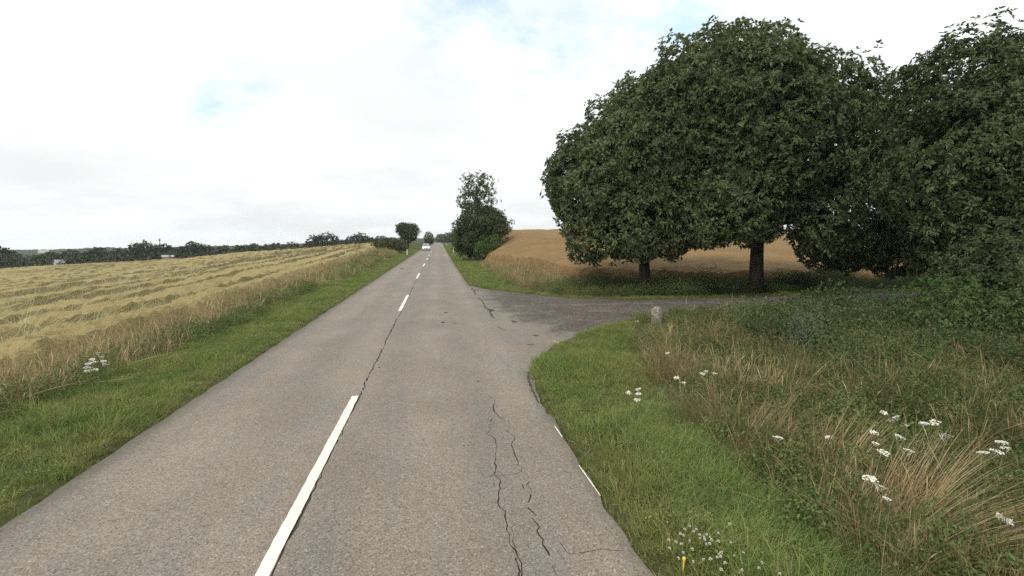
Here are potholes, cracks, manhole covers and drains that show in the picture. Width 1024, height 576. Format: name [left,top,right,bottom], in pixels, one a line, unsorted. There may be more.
crack [485,397,622,576]
